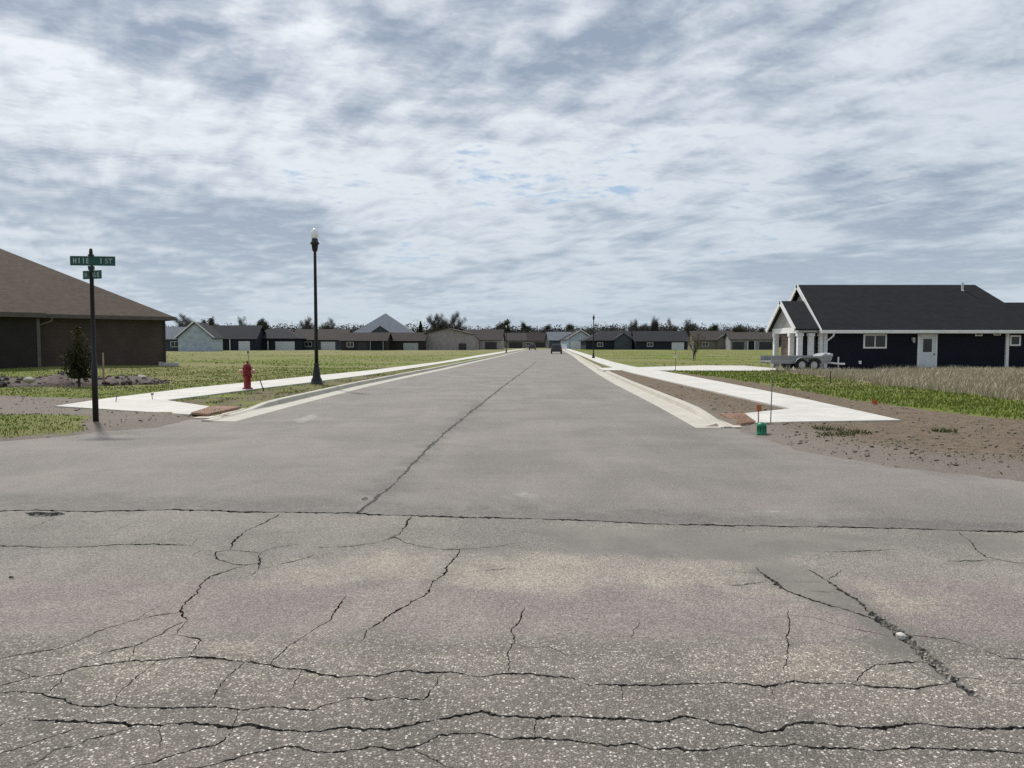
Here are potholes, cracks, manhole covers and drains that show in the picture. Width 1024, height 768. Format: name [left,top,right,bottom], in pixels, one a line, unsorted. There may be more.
crack [0,514,1024,768]
